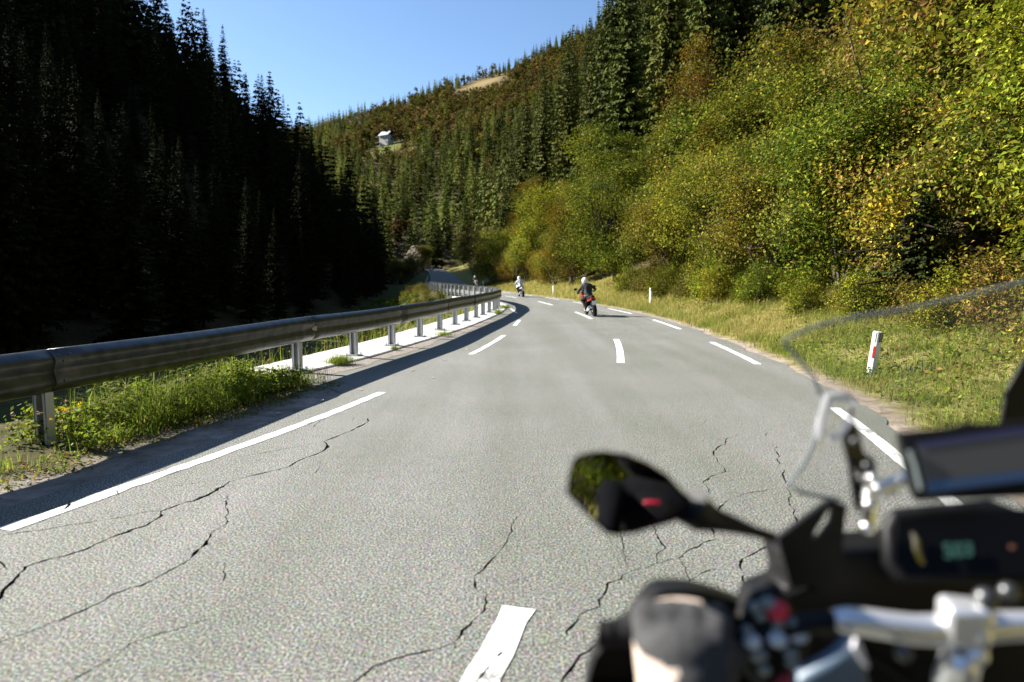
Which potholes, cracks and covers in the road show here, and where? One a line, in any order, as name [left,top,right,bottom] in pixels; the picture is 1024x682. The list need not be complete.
crack [354,516,517,682]
crack [562,434,770,682]
crack [0,418,372,643]
crack [765,433,797,520]
